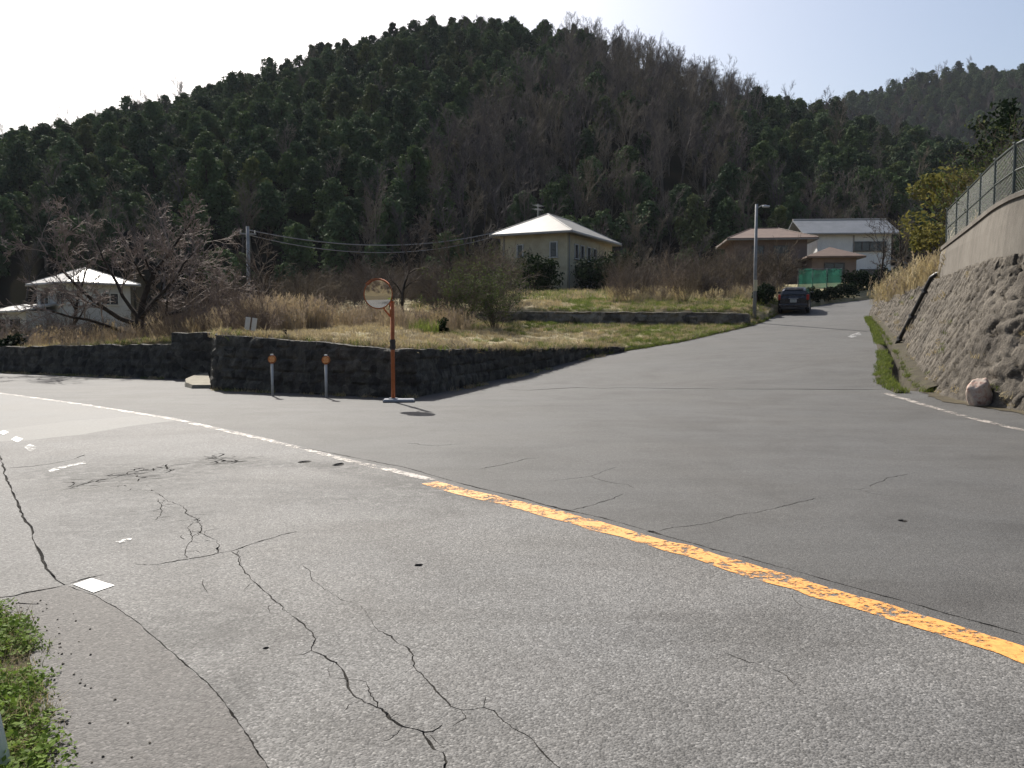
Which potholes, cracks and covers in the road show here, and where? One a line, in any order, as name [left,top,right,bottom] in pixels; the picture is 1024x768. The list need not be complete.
crack [200,453,262,465]
crack [62,463,560,768]
crack [660,498,814,531]
